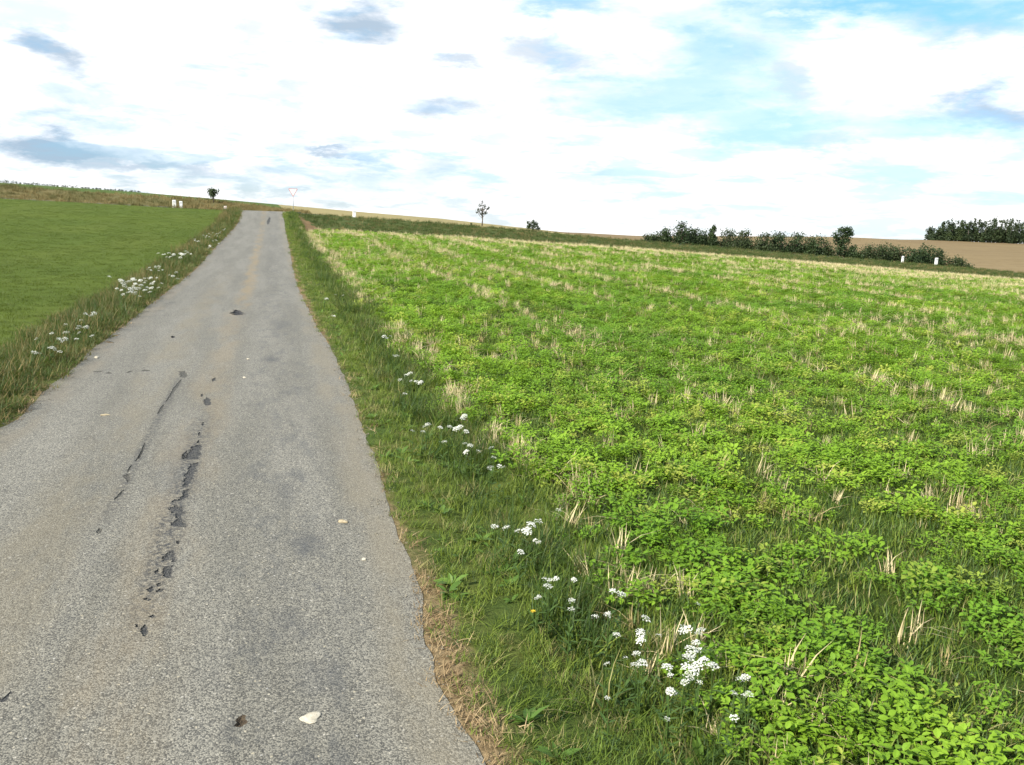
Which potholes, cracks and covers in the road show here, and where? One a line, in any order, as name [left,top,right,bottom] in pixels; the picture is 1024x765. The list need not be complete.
crack [93,370,216,636]
